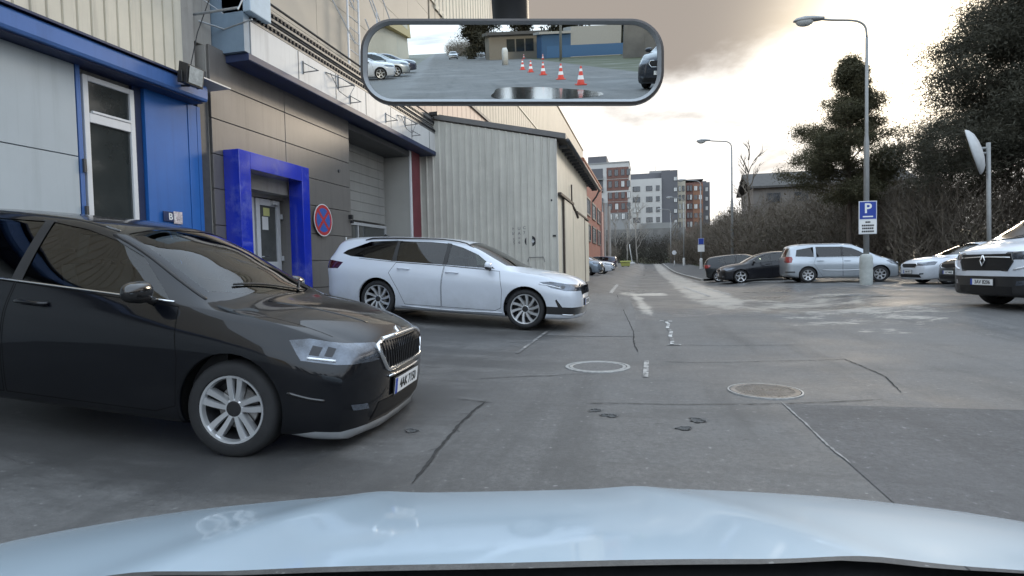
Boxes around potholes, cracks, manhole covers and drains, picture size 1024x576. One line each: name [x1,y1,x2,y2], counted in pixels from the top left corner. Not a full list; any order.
crack [412,399,492,483]
manhole cover [727,383,804,400]
manhole cover [565,361,630,373]
